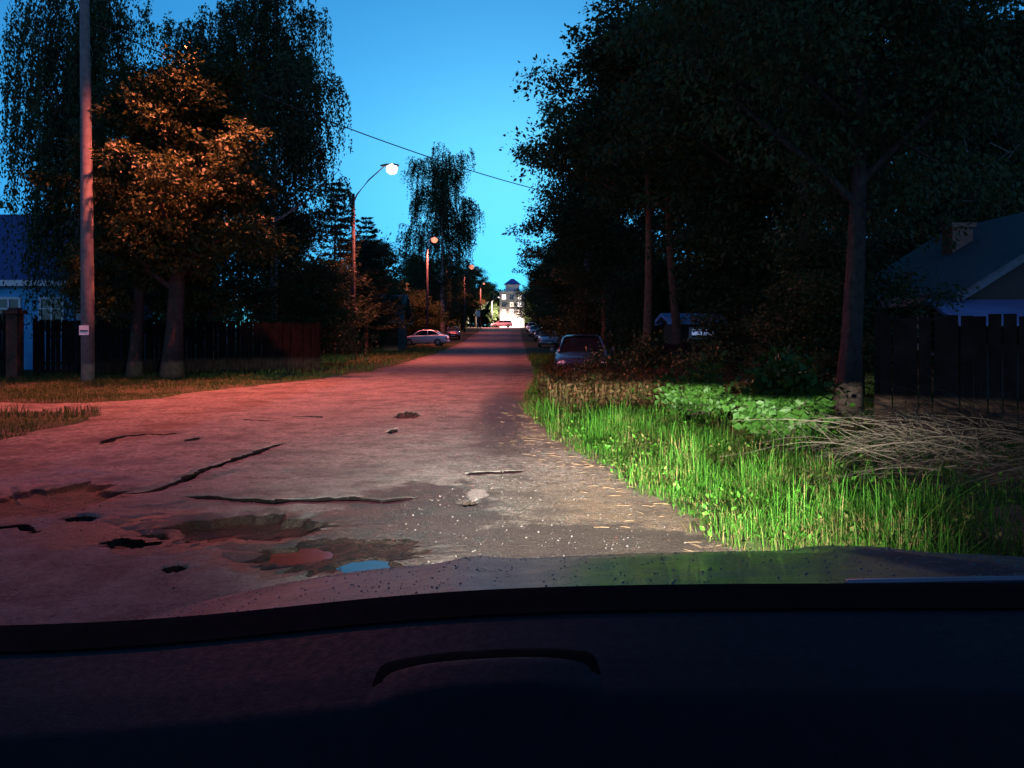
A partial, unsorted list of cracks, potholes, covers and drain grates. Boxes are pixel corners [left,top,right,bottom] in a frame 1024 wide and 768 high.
pothole [225,533,445,580]
pothole [390,411,426,419]
pothole [121,510,356,546]
pothole [47,512,113,524]
pothole [82,529,184,552]
crack [93,433,413,507]
pothole [448,497,489,508]
pothole [0,479,142,519]
